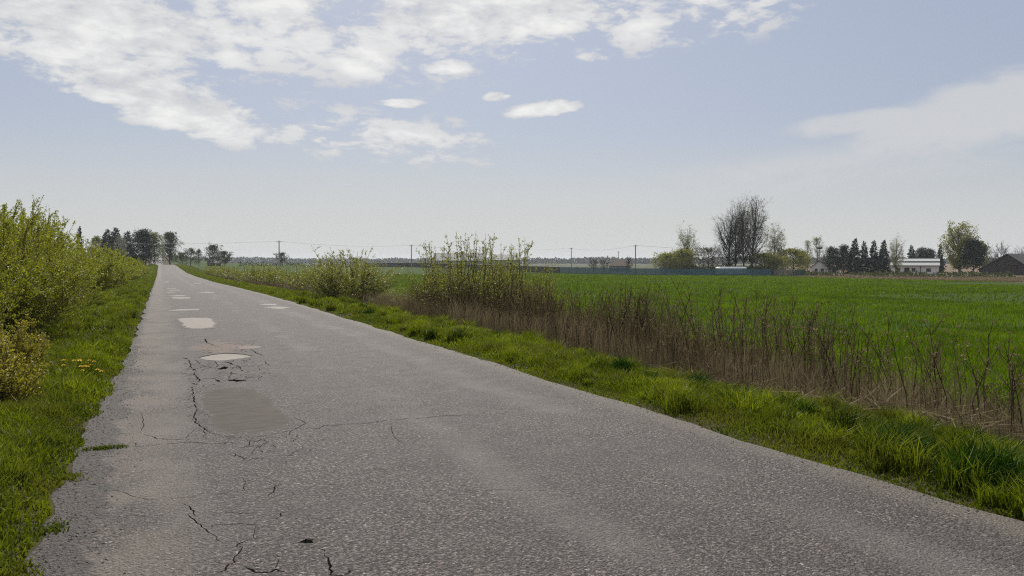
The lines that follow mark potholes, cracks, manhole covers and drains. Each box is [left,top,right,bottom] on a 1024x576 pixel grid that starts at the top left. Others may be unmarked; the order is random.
crack [137,338,472,519]
crack [113,469,285,575]
crack [317,547,352,576]
